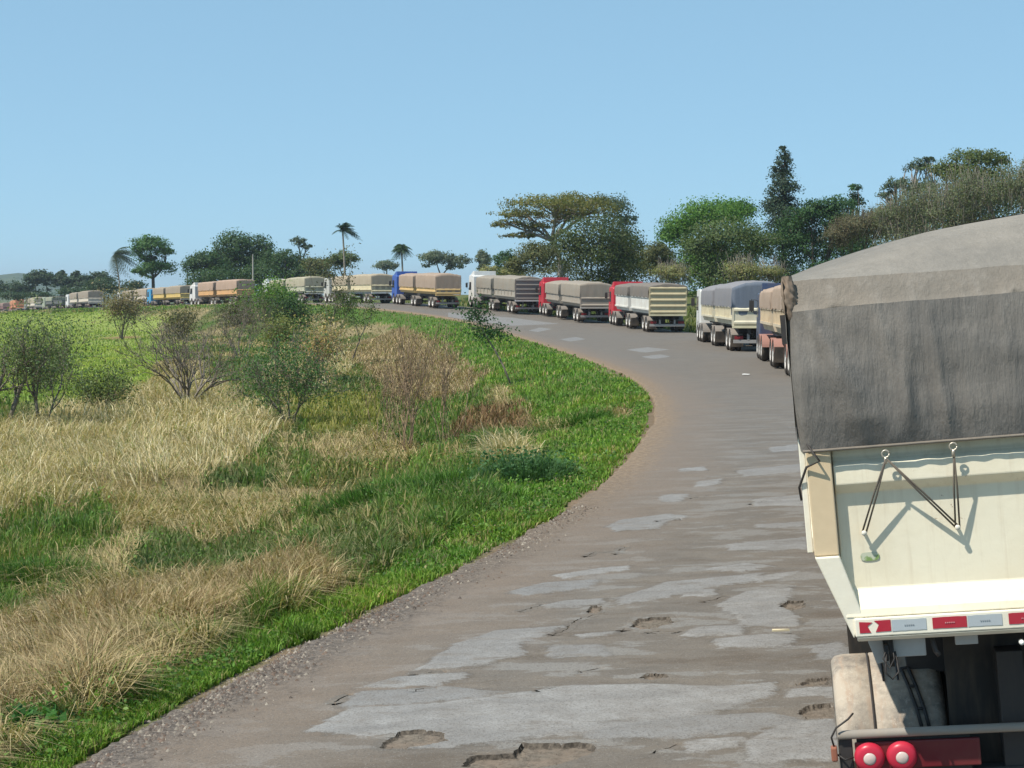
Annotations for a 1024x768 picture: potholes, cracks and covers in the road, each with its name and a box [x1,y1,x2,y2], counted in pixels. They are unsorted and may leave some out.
crack [325,694,355,705]
pothole [452,739,605,768]
pothole [787,701,835,721]
pothole [622,615,683,632]
pothole [789,676,832,688]
crack [514,604,680,636]
pothole [371,727,458,753]
pothole [773,599,814,612]
pothole [629,671,680,682]
pothole [580,603,611,615]
